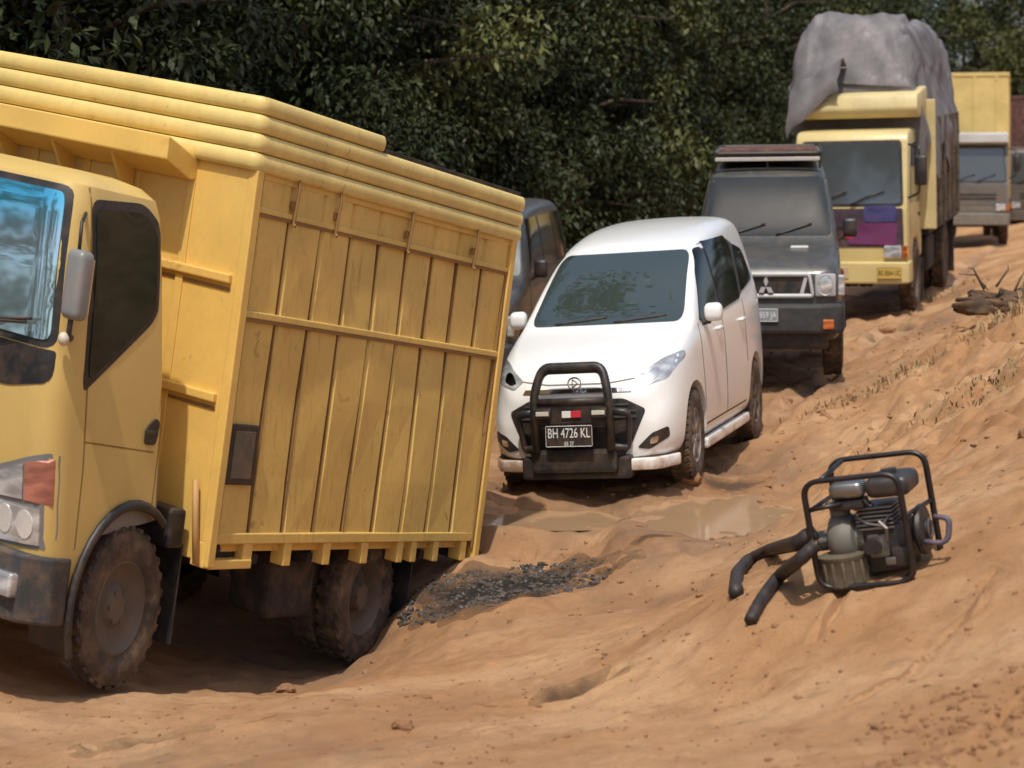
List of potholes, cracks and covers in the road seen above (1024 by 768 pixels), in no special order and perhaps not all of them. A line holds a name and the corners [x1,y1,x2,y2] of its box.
pothole [484,665,631,708]
